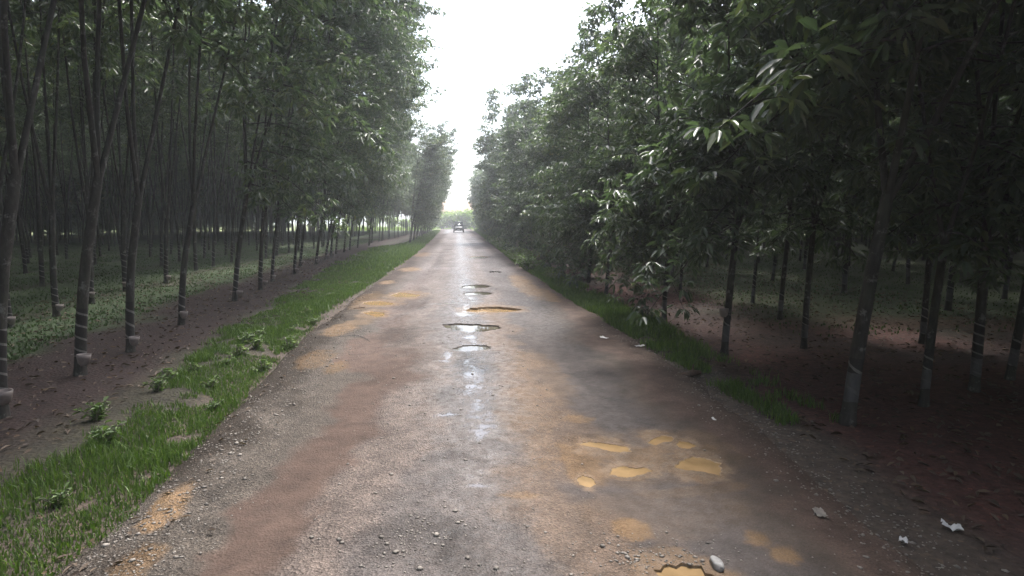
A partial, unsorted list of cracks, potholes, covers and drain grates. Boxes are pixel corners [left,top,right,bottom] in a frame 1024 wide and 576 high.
pothole [648,435,674,445]
pothole [674,456,722,476]
pothole [609,466,654,478]
pothole [577,475,596,487]
pothole [576,441,631,452]
pothole [442,323,500,332]
pothole [676,441,696,449]
pothole [654,563,714,576]
